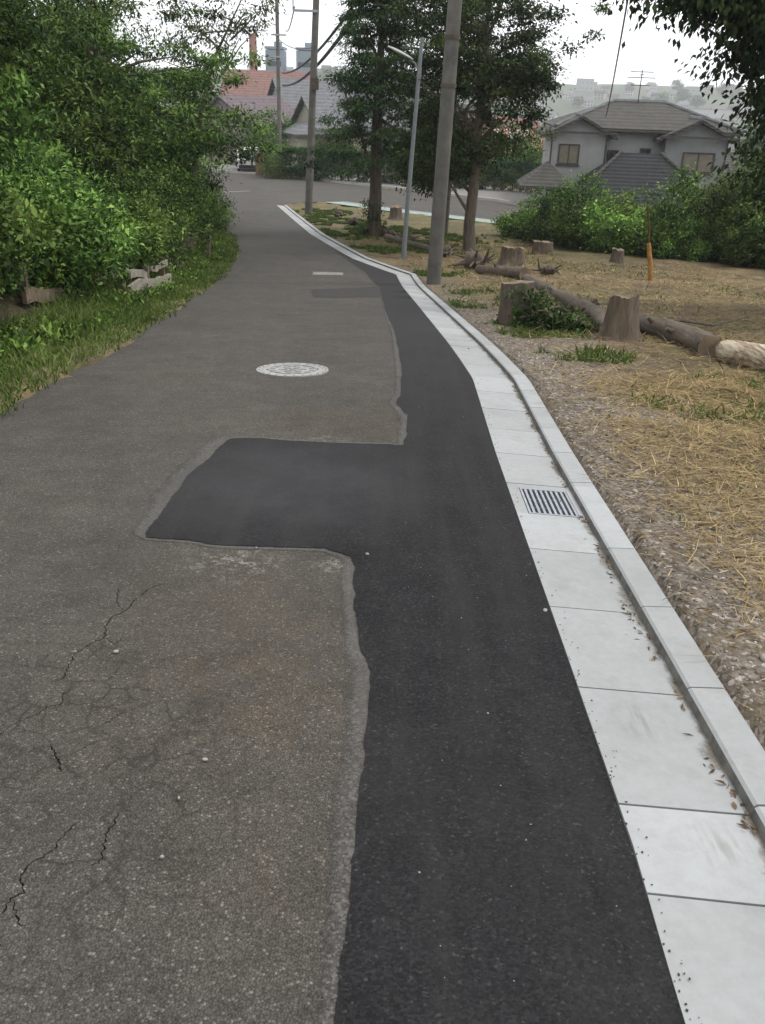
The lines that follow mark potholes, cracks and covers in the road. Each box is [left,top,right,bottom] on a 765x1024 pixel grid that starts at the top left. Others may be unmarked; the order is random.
crack [50,746,62,774]
crack [0,583,165,735]
manhole cover [256,363,329,377]
drain grate [519,488,579,518]
crack [0,812,119,926]
